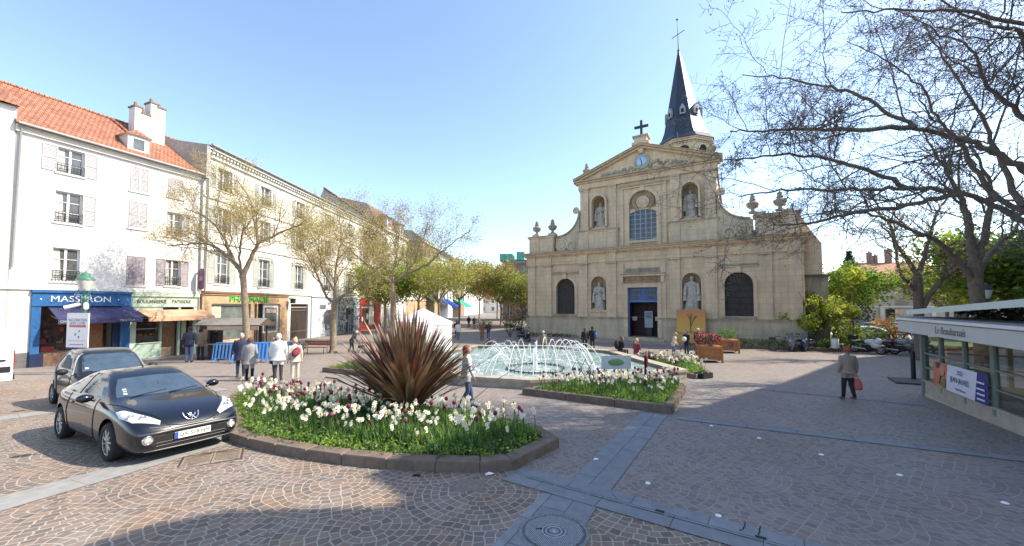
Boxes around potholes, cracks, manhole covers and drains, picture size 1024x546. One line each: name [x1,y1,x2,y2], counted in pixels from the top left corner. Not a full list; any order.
manhole cover [518,513,590,546]
